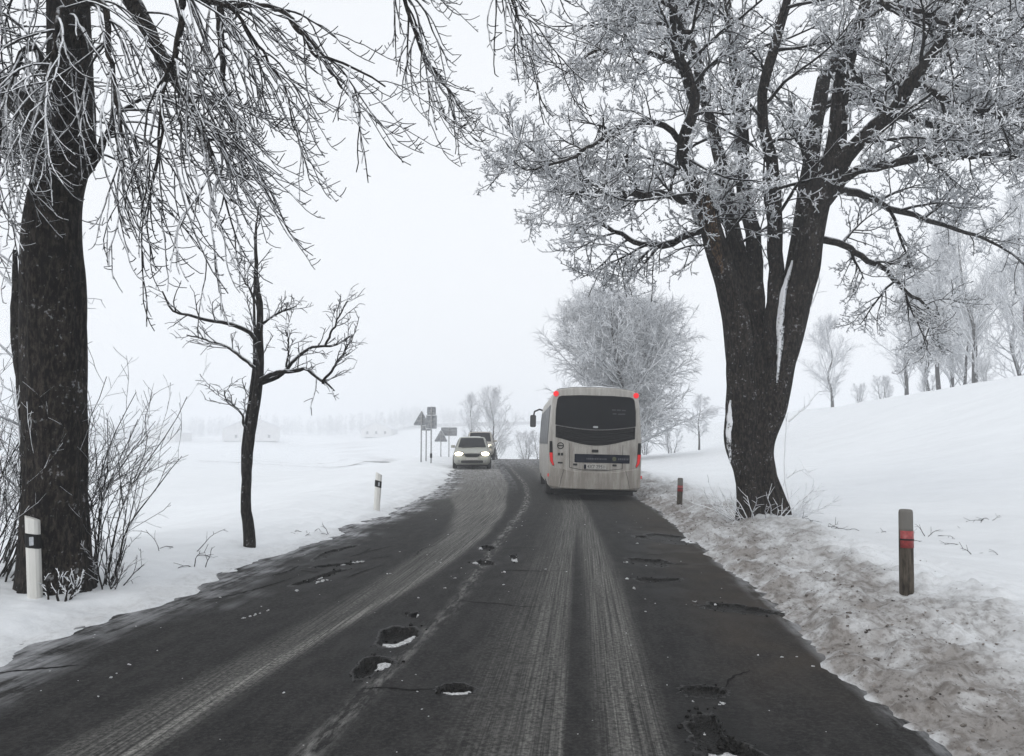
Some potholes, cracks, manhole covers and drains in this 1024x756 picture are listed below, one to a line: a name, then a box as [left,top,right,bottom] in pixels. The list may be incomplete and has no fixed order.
pothole [349,655,398,682]
pothole [373,625,423,649]
pothole [433,682,480,696]
pothole [681,711,770,756]
pothole [676,685,731,700]
